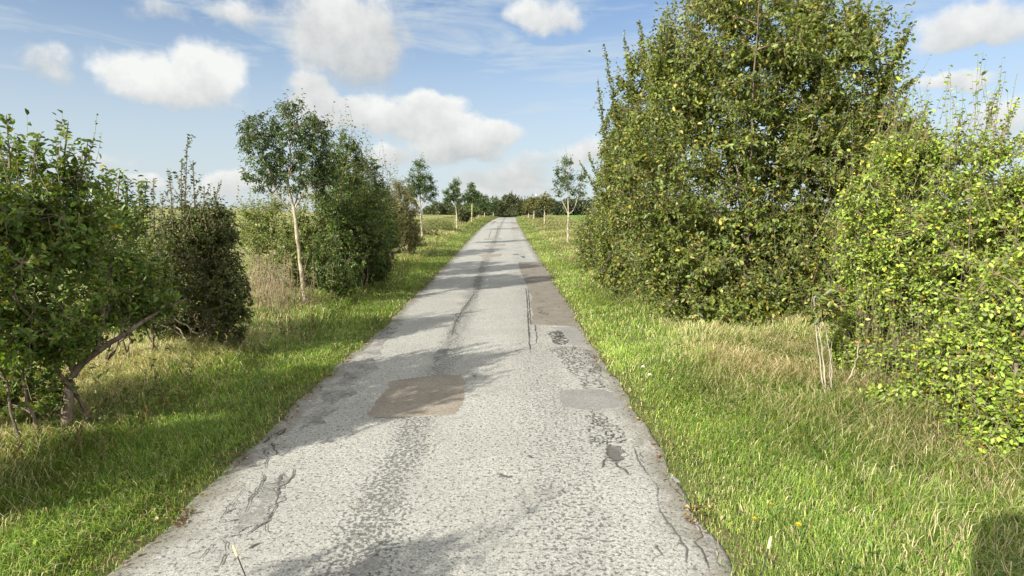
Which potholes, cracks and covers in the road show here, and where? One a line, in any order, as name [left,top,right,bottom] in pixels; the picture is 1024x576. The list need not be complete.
crack [537,307,605,387]
crack [200,428,294,566]
crack [573,410,725,571]
pothole [605,444,625,462]
